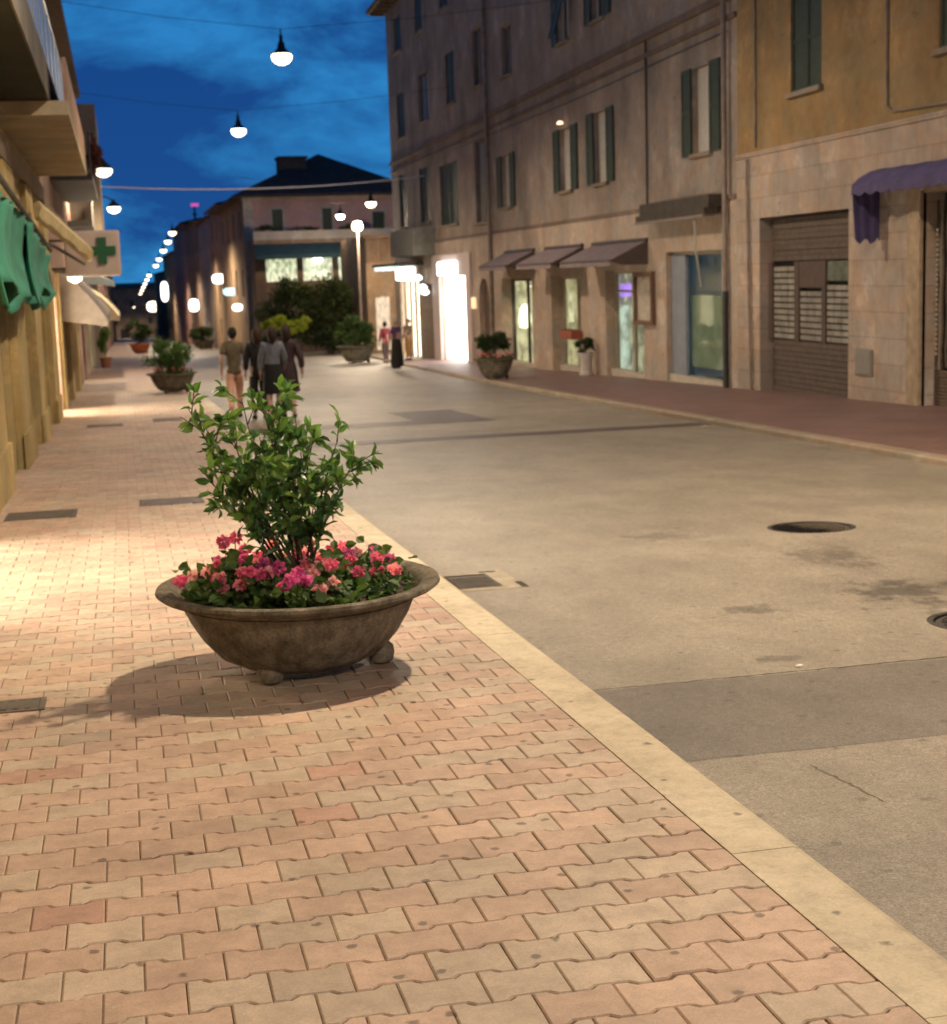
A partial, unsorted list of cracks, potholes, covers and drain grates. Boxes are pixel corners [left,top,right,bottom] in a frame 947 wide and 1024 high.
crack [812,766,885,802]
manhole cover [927,612,947,629]
manhole cover [767,521,856,533]
